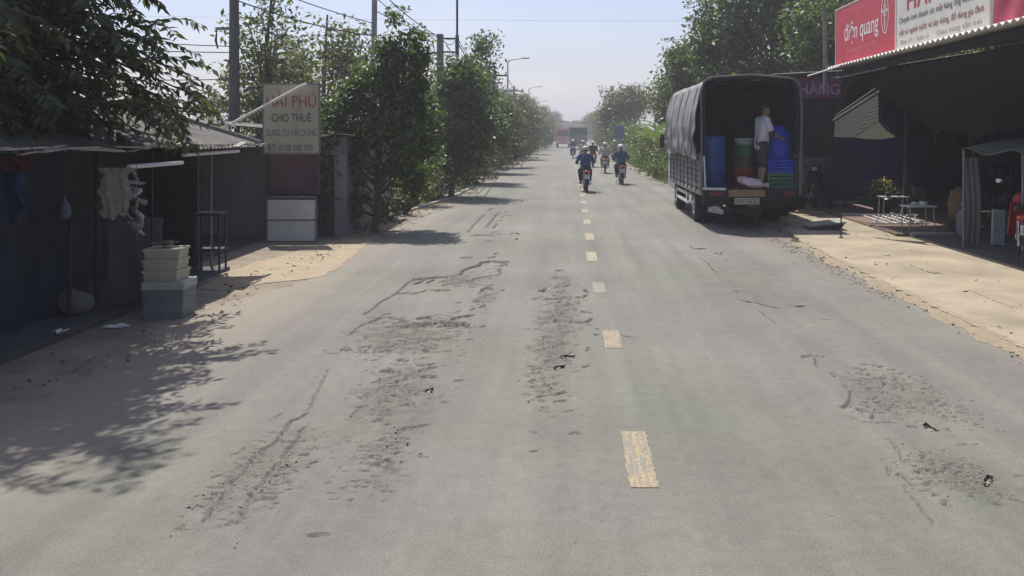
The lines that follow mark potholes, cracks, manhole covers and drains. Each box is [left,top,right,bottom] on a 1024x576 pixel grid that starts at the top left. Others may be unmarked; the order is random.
crack [736,287,803,324]
crack [76,197,635,543]
crack [756,334,1024,543]
